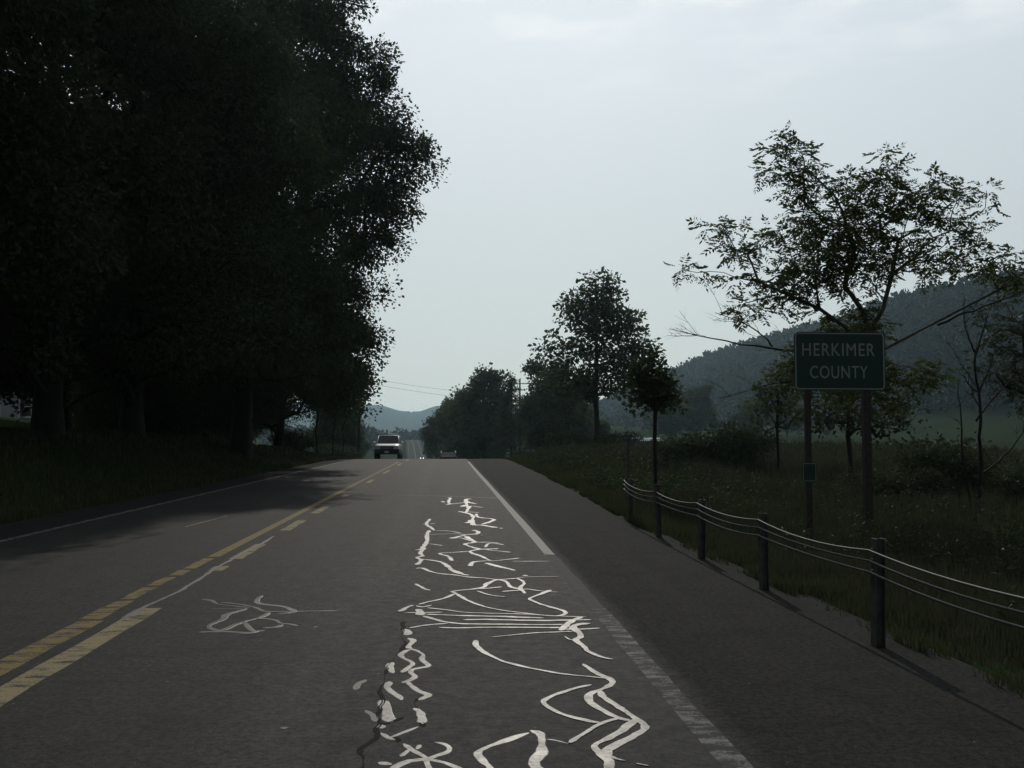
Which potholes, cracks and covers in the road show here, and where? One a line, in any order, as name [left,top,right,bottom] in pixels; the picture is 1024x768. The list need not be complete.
crack [356,622,427,768]
